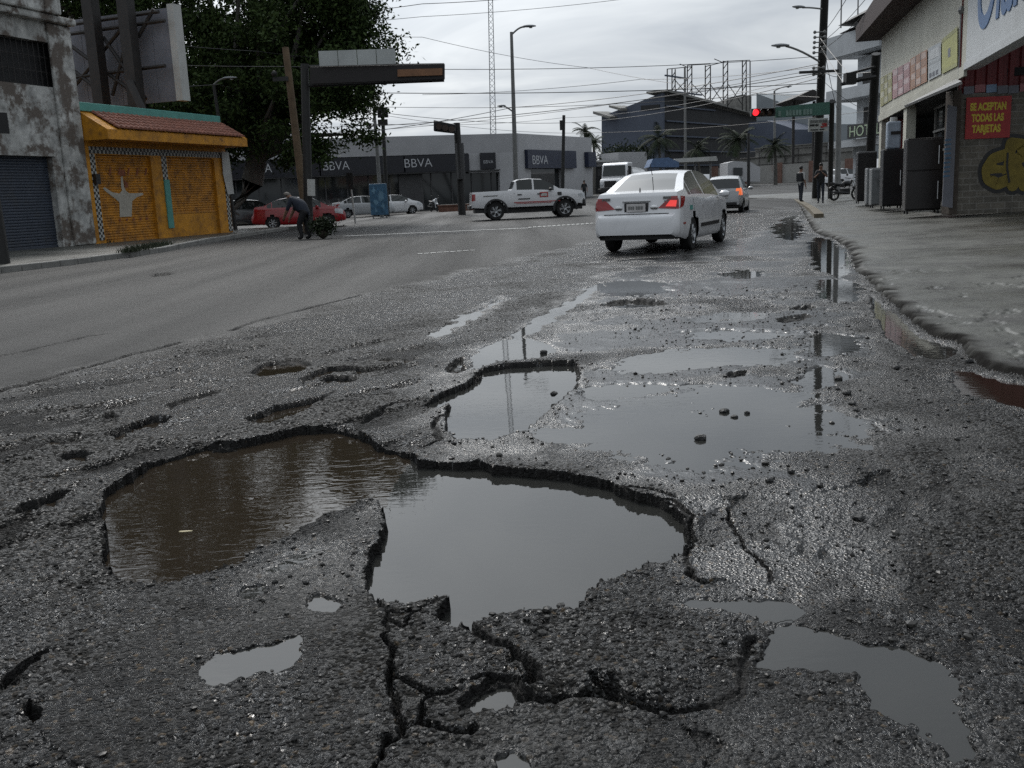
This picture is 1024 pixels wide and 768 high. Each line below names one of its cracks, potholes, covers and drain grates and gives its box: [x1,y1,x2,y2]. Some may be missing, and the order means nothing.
pothole [418,360,581,440]
pothole [96,425,410,585]
pothole [105,414,172,440]
pothole [245,390,337,423]
crack [370,595,758,768]
pothole [362,452,692,632]
pothole [250,358,313,376]
pothole [301,365,368,384]
pothole [726,370,747,378]
crack [726,510,775,584]
pothole [445,357,467,373]
